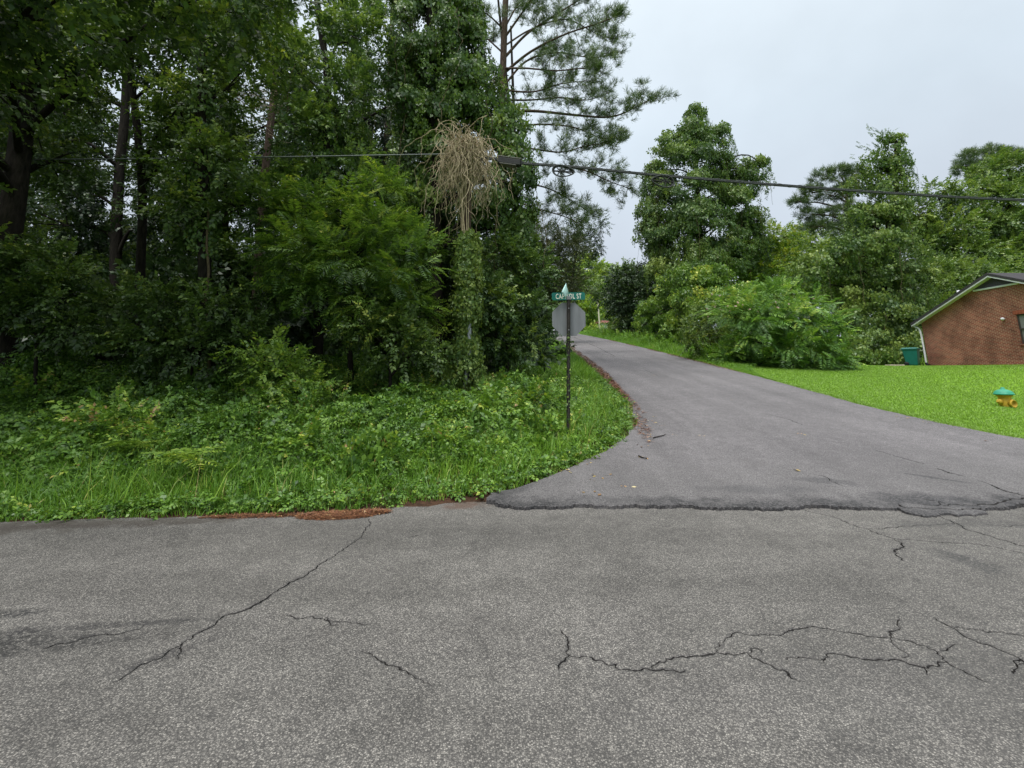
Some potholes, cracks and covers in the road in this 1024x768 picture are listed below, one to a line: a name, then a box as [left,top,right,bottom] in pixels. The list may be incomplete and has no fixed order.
crack [938,621,1024,674]
crack [557,619,988,683]
crack [44,628,141,649]
crack [116,520,371,682]
crack [365,652,430,685]
crack [805,451,1024,561]
